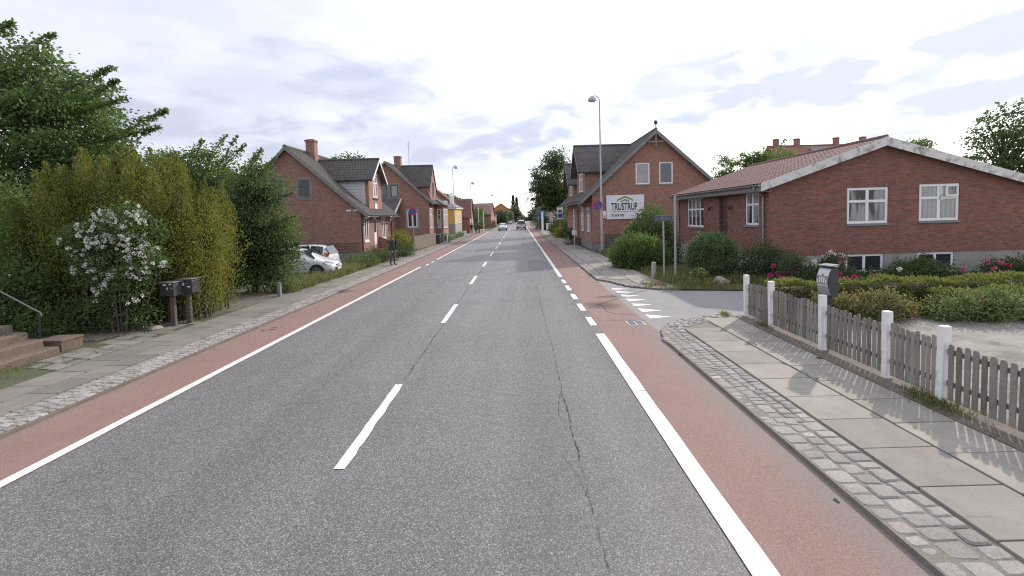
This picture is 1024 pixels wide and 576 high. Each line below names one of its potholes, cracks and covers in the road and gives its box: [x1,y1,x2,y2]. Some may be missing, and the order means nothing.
crack [558,394,588,497]
